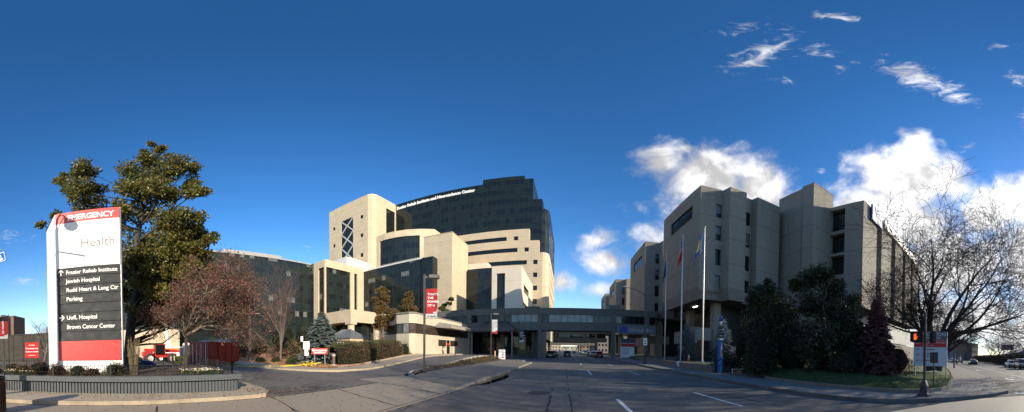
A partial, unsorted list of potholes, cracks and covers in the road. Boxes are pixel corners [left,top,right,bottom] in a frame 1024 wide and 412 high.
crack [546,369,573,412]
